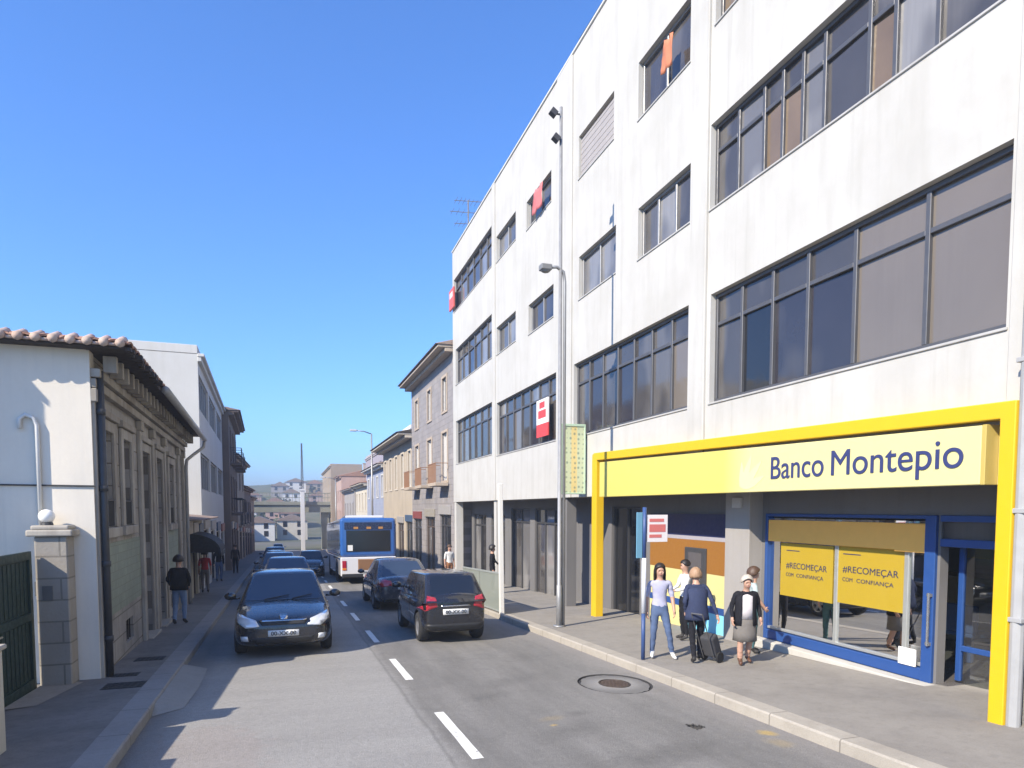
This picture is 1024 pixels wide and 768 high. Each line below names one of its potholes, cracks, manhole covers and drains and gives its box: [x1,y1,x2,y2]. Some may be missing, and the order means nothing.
manhole cover [577,674,653,694]
